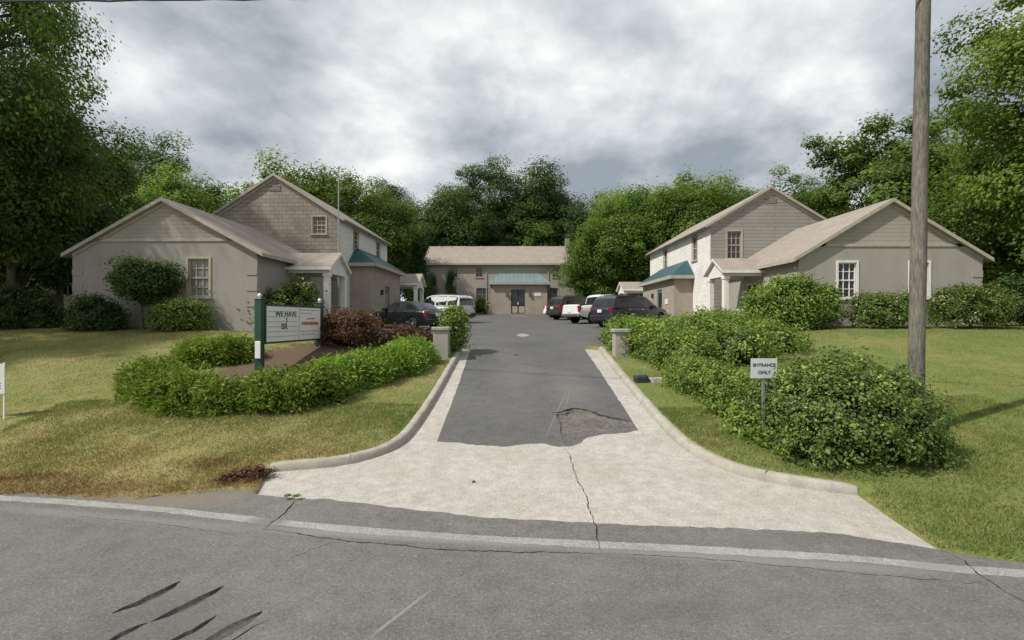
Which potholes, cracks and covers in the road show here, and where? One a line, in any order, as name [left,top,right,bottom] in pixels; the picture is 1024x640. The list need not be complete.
crack [951,554,1023,601]
pothole [555,411,635,444]
crack [263,451,982,584]
